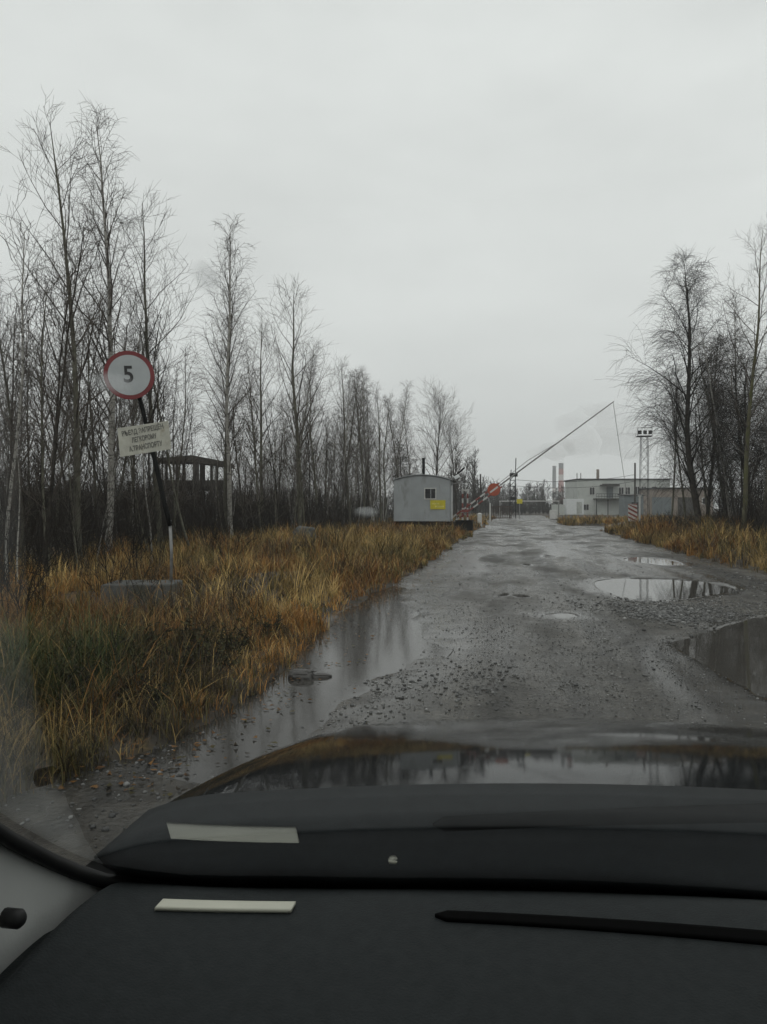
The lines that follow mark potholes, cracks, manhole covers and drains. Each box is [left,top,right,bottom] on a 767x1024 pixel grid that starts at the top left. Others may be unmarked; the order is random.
pothole [622,557,687,566]
pothole [661,613,767,703]
pothole [589,577,741,602]
